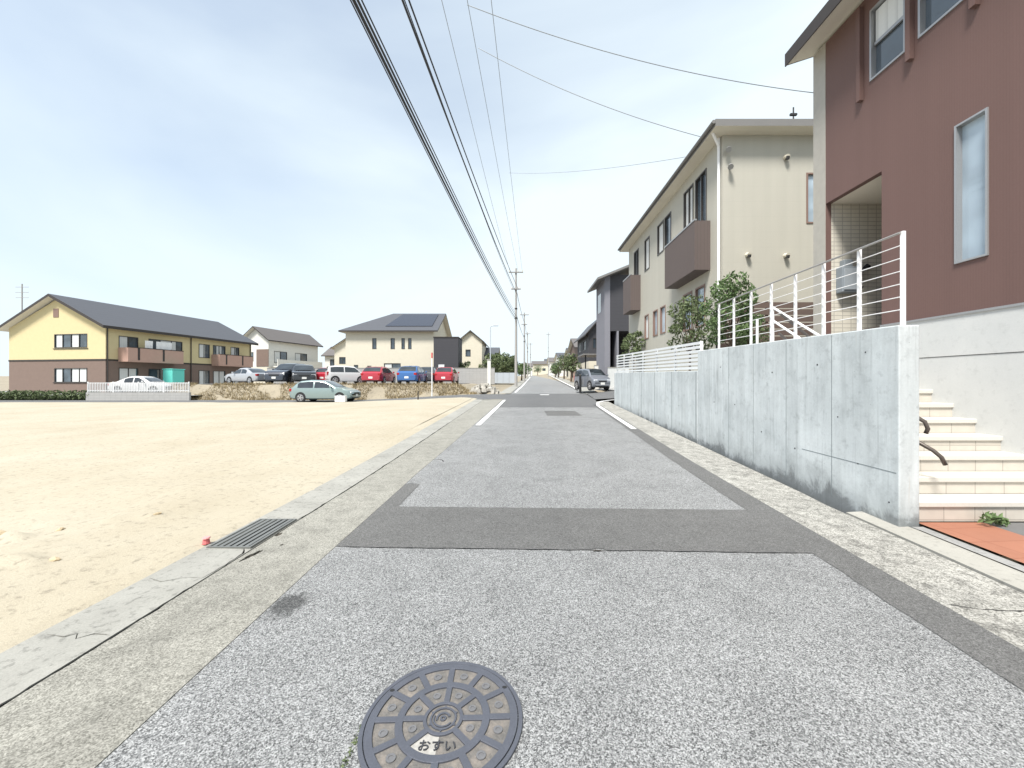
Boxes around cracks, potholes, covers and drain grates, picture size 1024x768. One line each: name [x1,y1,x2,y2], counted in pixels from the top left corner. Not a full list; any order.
crack [949,604,1024,612]
manhole cover [357,661,523,768]
drain grate [206,519,297,549]
